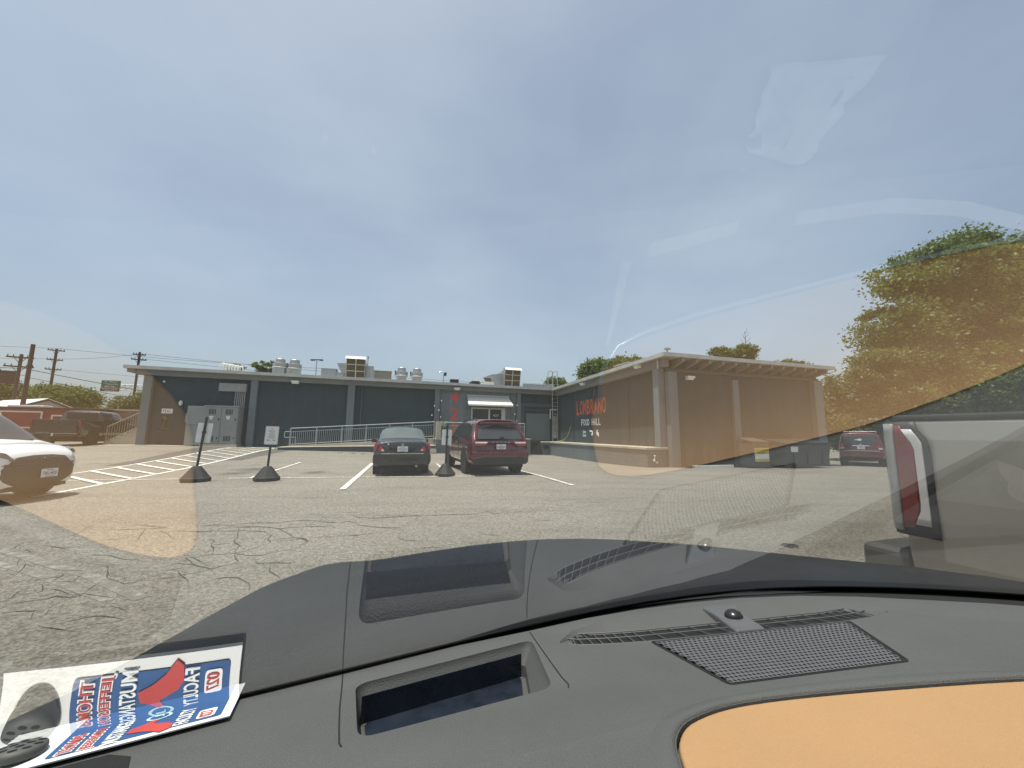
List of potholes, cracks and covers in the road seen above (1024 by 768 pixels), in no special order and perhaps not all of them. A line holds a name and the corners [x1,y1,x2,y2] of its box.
crack [0,507,539,631]
